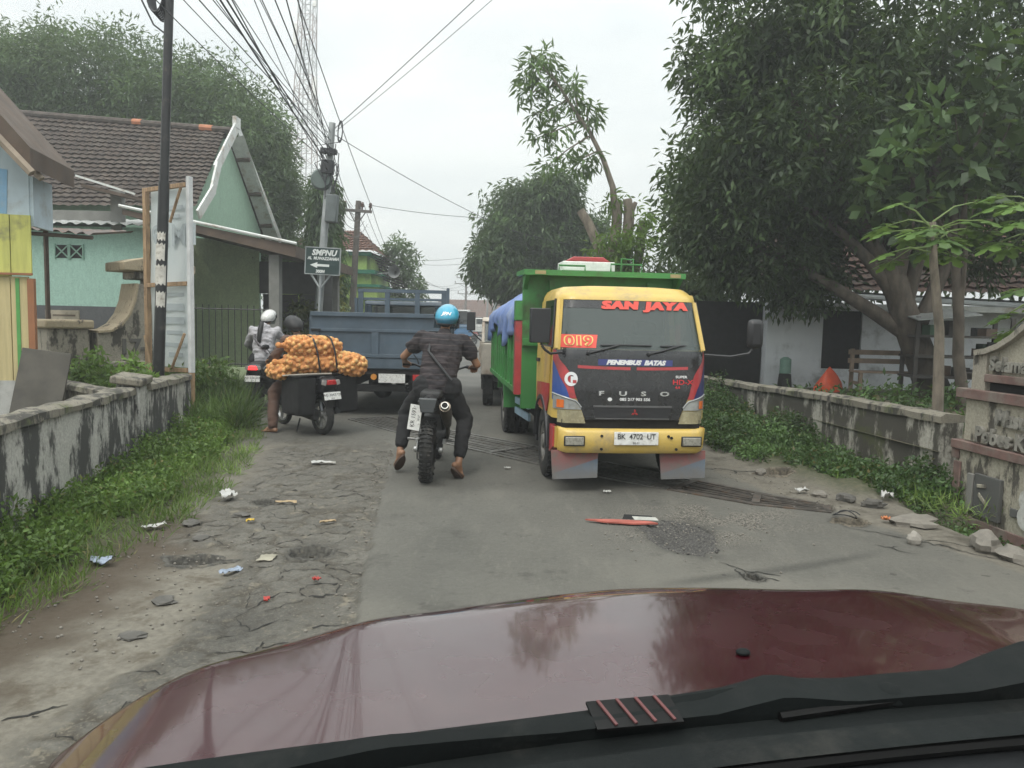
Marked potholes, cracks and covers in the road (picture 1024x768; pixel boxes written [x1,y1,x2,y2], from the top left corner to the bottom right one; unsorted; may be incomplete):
drain grate [348,416,454,434]
drain grate [752,492,832,513]
crack [1,447,382,741]
drain grate [410,430,534,453]
pothole [159,553,241,569]
pothole [285,544,337,562]
crack [846,527,1006,561]
pothole [639,520,720,557]
crack [721,562,780,581]
drain grate [667,479,772,505]
